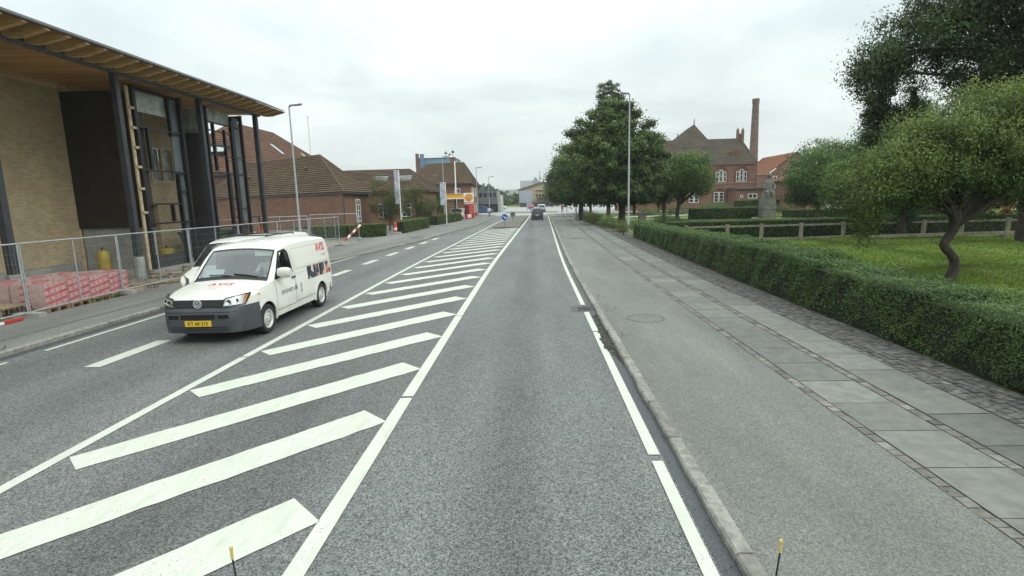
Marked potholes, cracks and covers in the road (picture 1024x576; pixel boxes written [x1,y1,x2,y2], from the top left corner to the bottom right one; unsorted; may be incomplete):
manhole cover [627,314,665,322]
